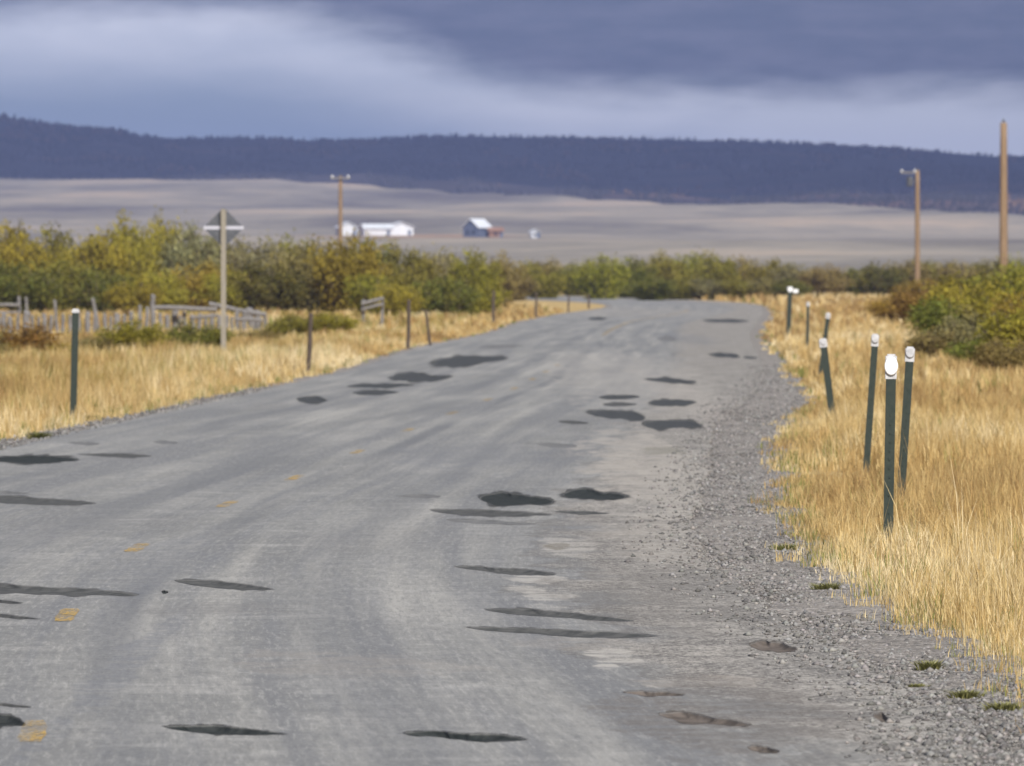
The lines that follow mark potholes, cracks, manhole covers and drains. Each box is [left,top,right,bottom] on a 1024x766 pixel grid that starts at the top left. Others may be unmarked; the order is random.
pothole [403,730,527,742]
pothole [165,724,286,735]
pothole [0,583,139,596]
pothole [478,491,555,507]
pothole [749,639,798,653]
pothole [467,626,656,638]
pothole [454,565,556,575]
pothole [430,355,508,368]
pothole [560,487,629,500]
pothole [586,409,646,421]
pothole [658,710,751,726]
pothole [645,376,696,384]
